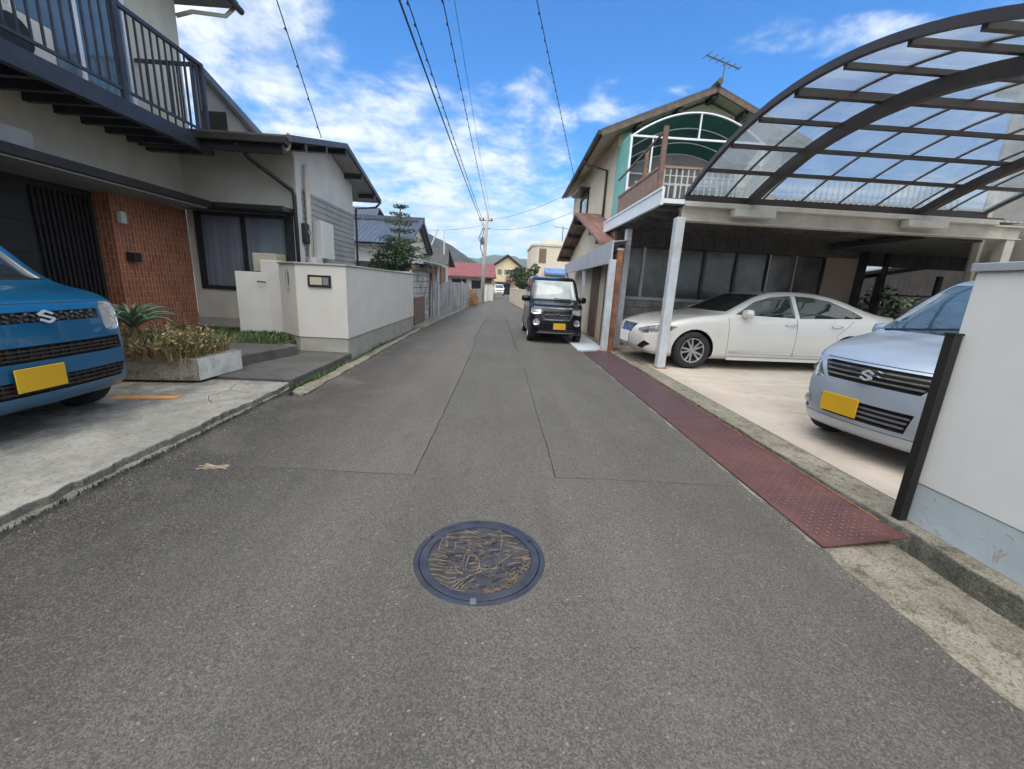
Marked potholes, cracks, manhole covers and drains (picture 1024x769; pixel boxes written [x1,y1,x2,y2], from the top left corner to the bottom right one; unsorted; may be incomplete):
manhole cover [413,521,545,606]
